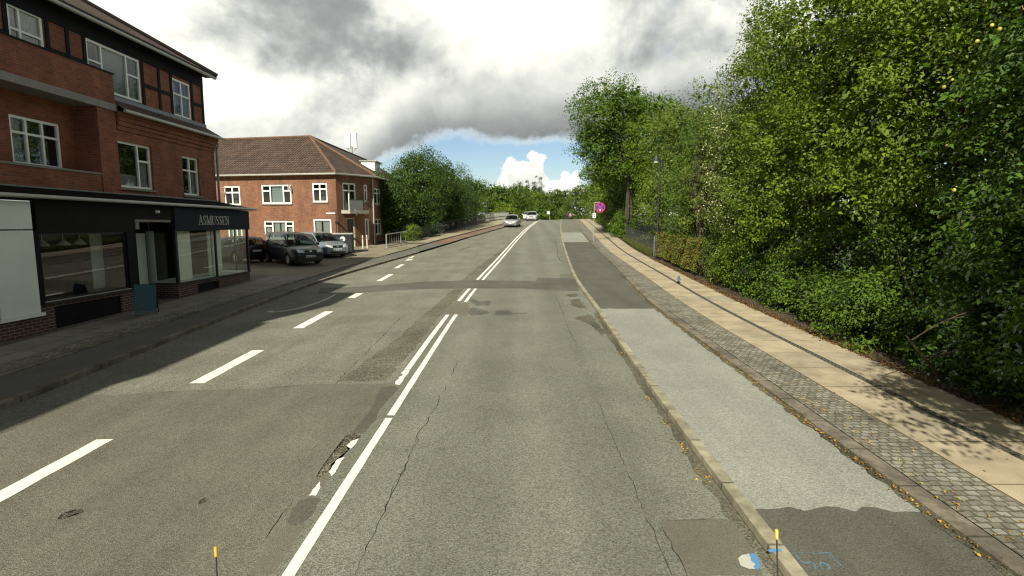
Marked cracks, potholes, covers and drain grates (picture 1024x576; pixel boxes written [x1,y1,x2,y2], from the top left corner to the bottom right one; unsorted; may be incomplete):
pothole [58,509,85,519]
crack [355,360,458,574]
pothole [316,433,361,478]
crack [598,402,726,576]
